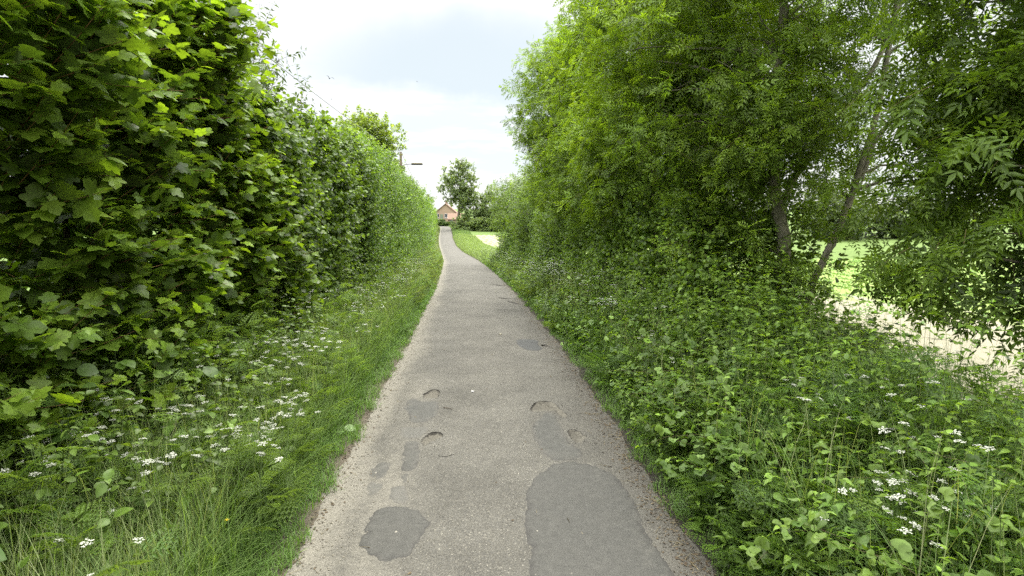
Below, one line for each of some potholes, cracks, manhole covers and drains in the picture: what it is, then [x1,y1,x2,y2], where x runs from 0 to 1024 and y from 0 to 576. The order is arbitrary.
pothole [420,432,443,446]
pothole [567,429,586,443]
pothole [530,401,568,418]
pothole [423,389,440,398]
